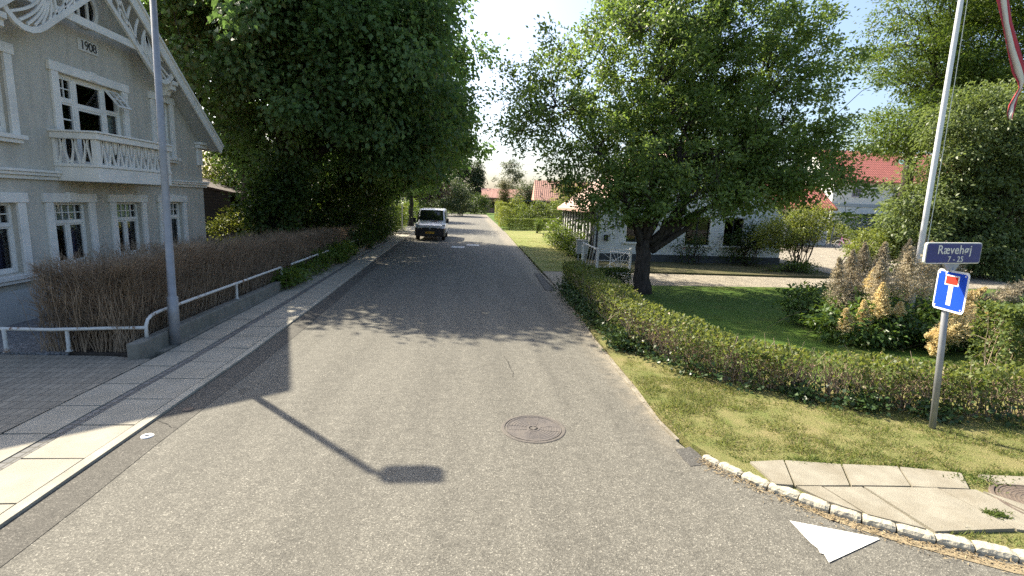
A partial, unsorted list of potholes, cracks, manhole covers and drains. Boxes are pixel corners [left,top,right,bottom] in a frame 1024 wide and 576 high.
manhole cover [988,483,1024,514]
manhole cover [501,415,566,444]
